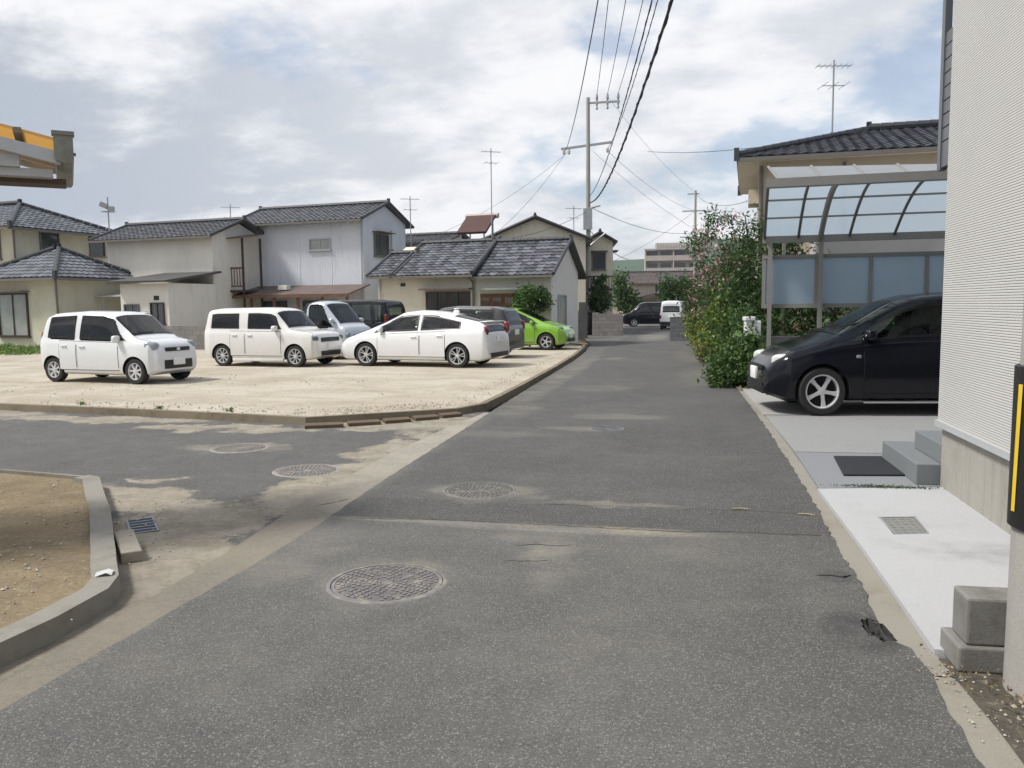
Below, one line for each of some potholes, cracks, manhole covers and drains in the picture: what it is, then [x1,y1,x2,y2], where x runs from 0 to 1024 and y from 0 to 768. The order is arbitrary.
pothole [861,617,897,643]
drain grate [126,517,159,534]
manhole cover [326,563,447,604]
crack [508,544,570,562]
manhole cover [209,443,270,453]
manhole cover [272,464,341,478]
manhole cover [443,482,518,499]
